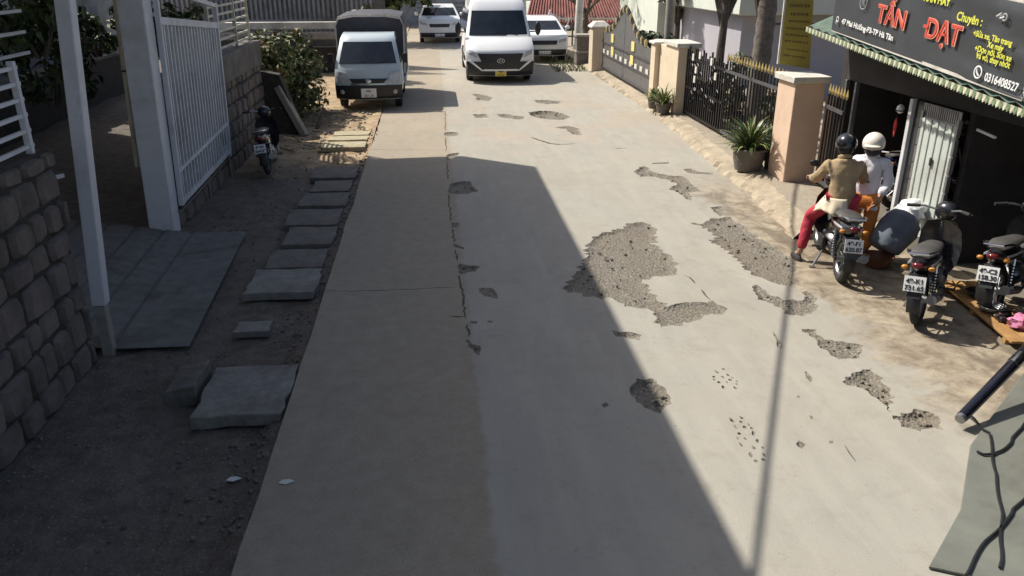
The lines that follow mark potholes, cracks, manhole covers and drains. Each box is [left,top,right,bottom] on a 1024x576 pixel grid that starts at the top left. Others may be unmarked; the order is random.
pothole [448,181,478,194]
pothole [629,378,671,413]
pothole [528,111,570,120]
pothole [802,329,863,359]
pothole [634,166,701,200]
pothole [479,288,498,299]
pothole [842,369,895,406]
pothole [692,217,798,286]
pothole [555,126,582,135]
pothole [892,409,943,431]
pothole [752,285,819,316]
pothole [729,416,766,463]
